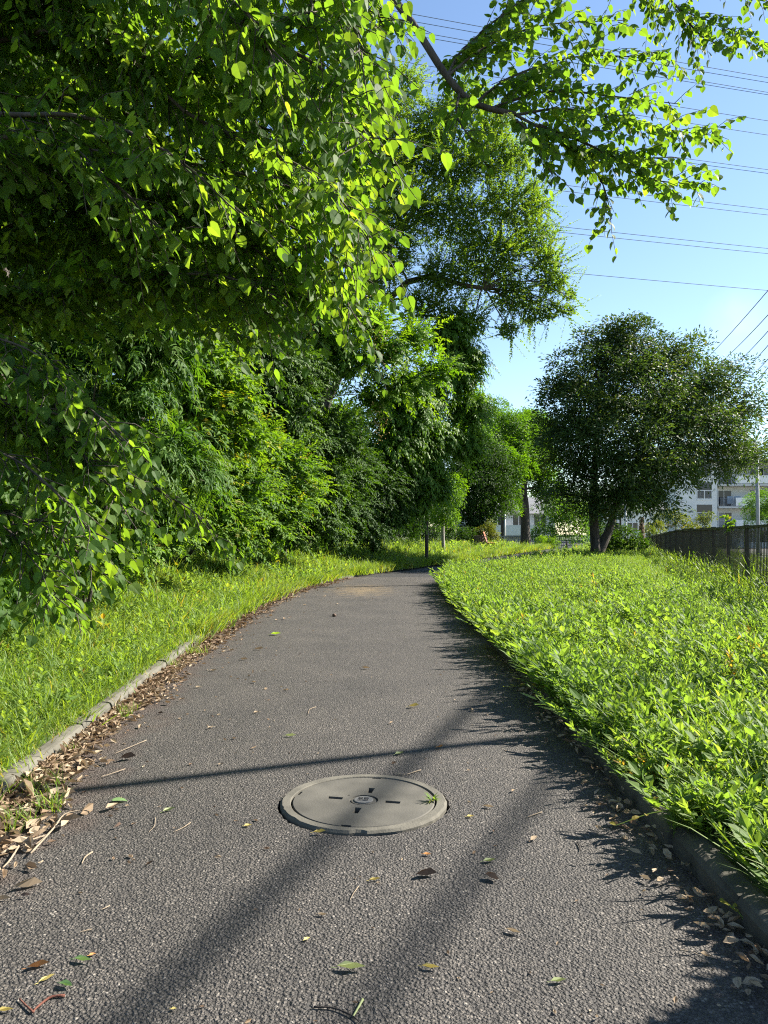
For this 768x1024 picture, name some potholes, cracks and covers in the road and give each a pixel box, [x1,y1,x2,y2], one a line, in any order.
manhole cover [280,774,447,836]
